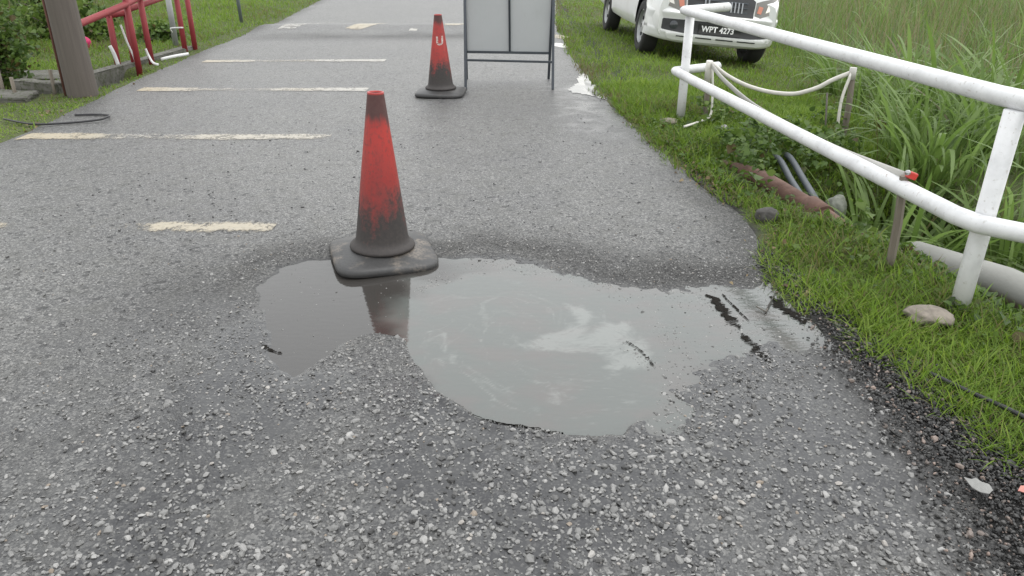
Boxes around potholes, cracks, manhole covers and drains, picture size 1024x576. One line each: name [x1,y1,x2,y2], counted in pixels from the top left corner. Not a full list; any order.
pothole [250,255,391,380]
pothole [401,338,643,438]
